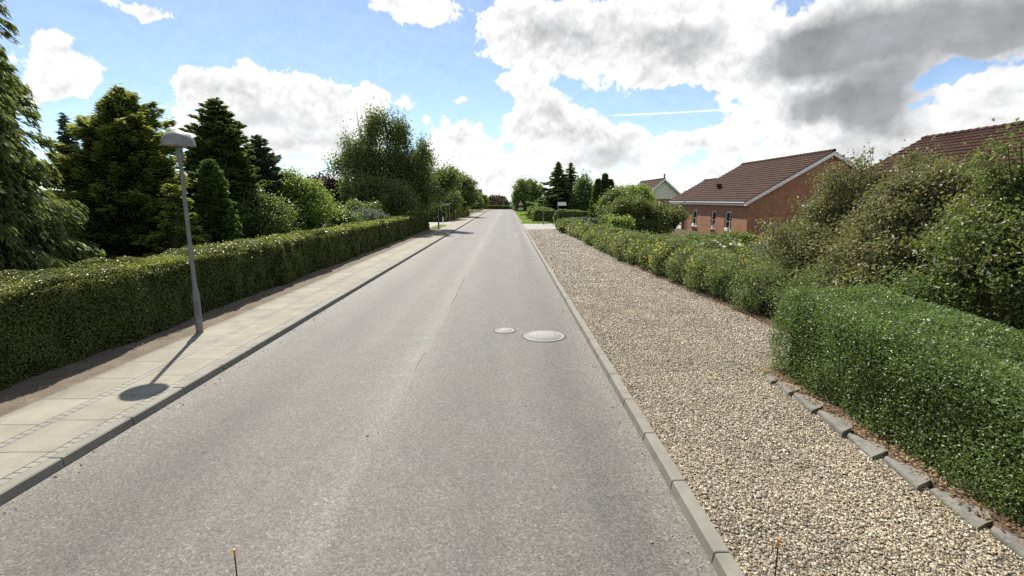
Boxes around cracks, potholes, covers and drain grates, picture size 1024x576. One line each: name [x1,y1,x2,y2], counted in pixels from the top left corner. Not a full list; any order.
manhole cover [521,330,567,343]
